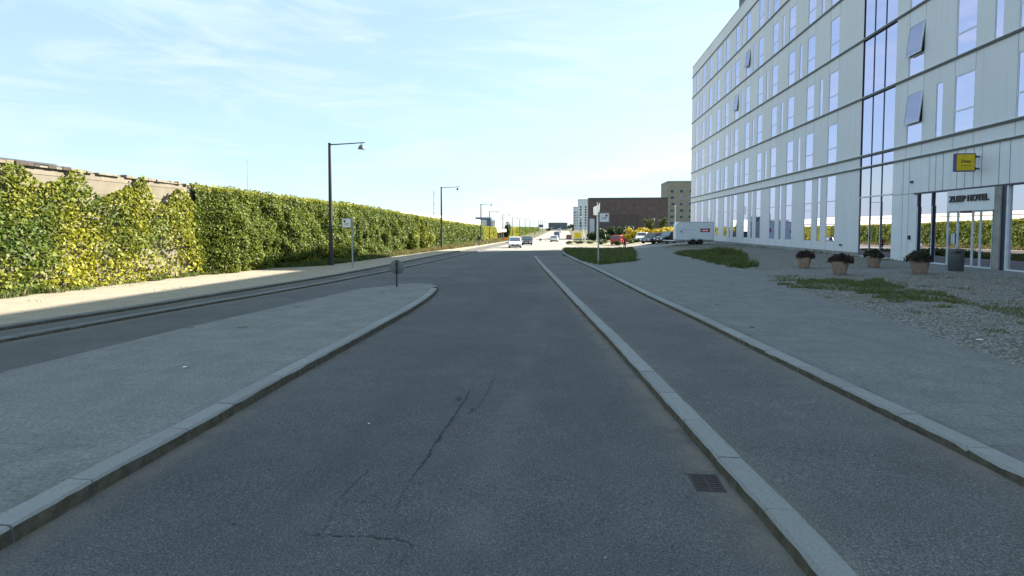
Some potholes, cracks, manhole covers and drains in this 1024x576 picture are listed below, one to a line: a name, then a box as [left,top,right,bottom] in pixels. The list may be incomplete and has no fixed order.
drain grate [684,470,727,493]
crack [303,382,493,568]
